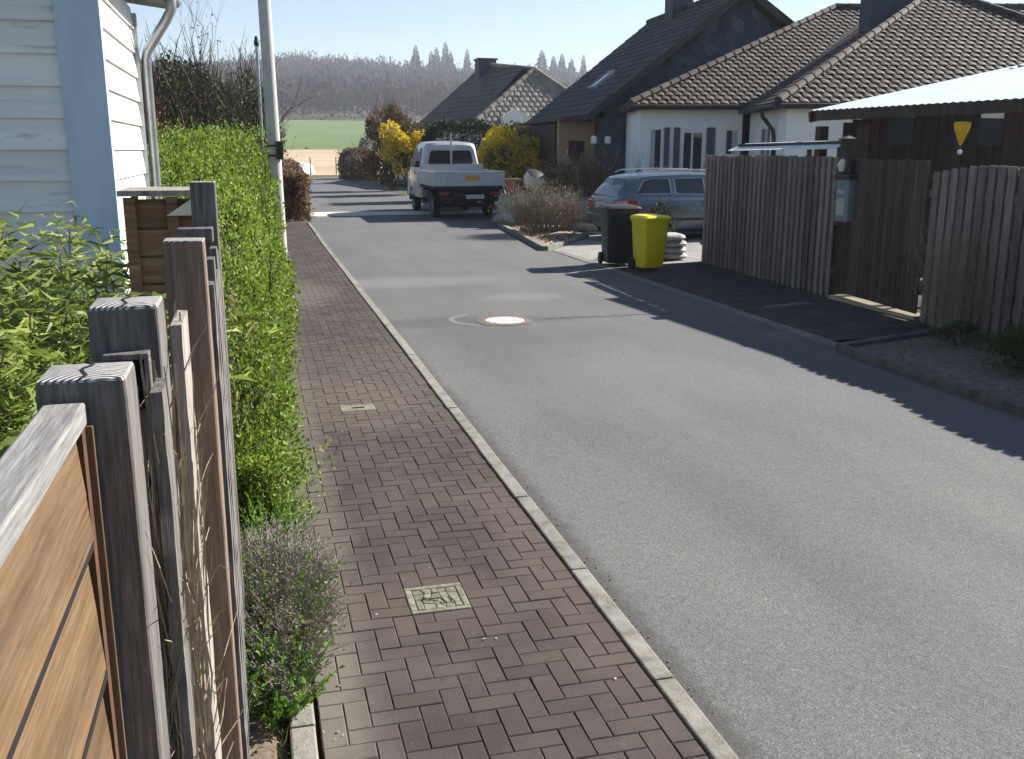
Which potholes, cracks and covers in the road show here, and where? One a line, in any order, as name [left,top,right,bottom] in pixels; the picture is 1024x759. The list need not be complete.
manhole cover [476,316,533,326]
manhole cover [340,404,376,412]
manhole cover [403,582,472,616]
